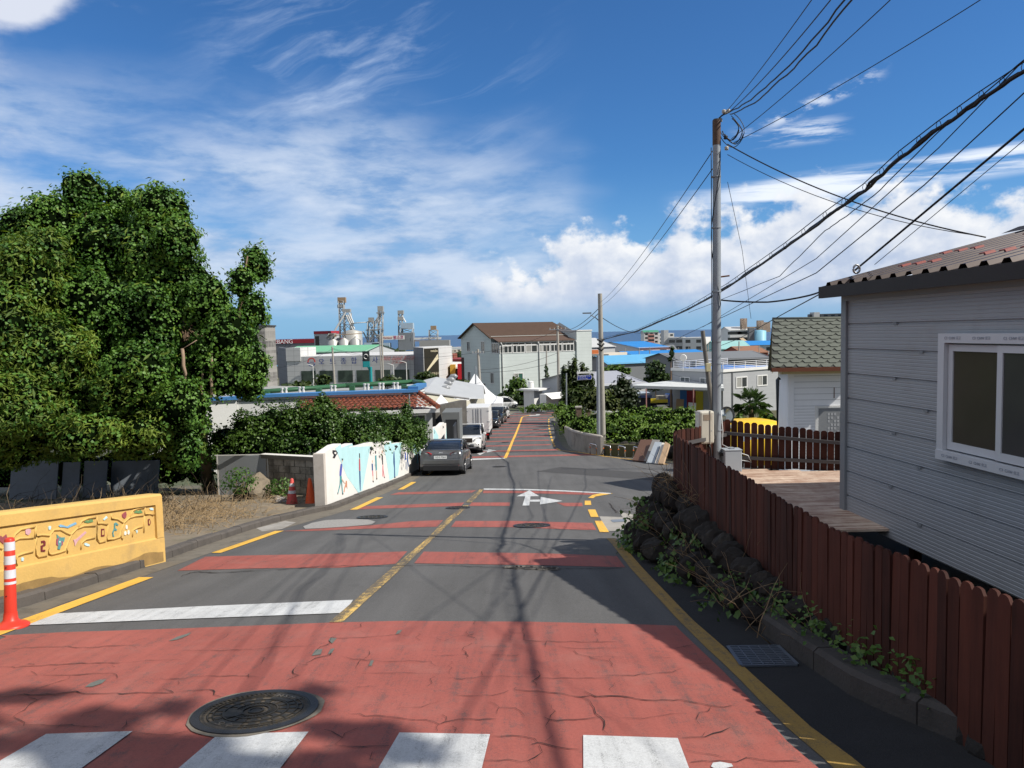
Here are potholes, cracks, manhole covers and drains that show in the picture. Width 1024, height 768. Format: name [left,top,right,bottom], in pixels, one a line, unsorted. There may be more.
manhole cover [186,689,325,737]
drain grate [727,645,799,667]
crack [2,622,731,763]
crack [682,727,801,762]
